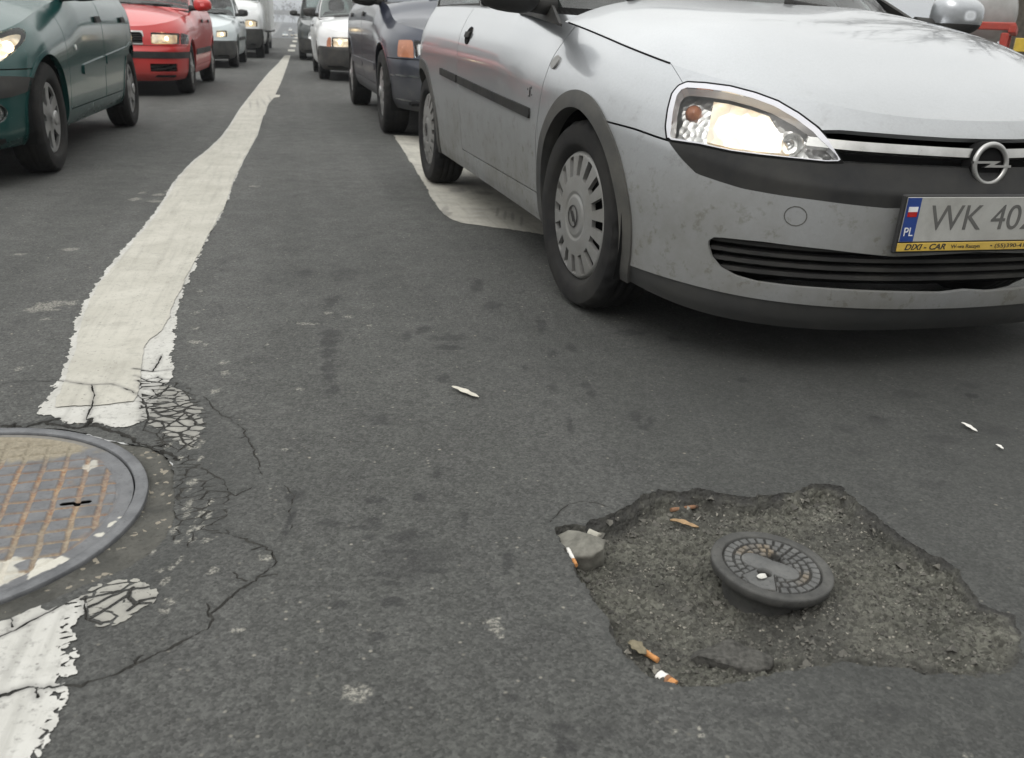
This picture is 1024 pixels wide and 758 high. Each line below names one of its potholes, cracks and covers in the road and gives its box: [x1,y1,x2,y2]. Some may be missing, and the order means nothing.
pothole [555,483,1024,688]
crack [0,357,296,698]
crack [549,501,608,522]
manhole cover [0,428,176,620]
utility cover [710,531,834,617]
